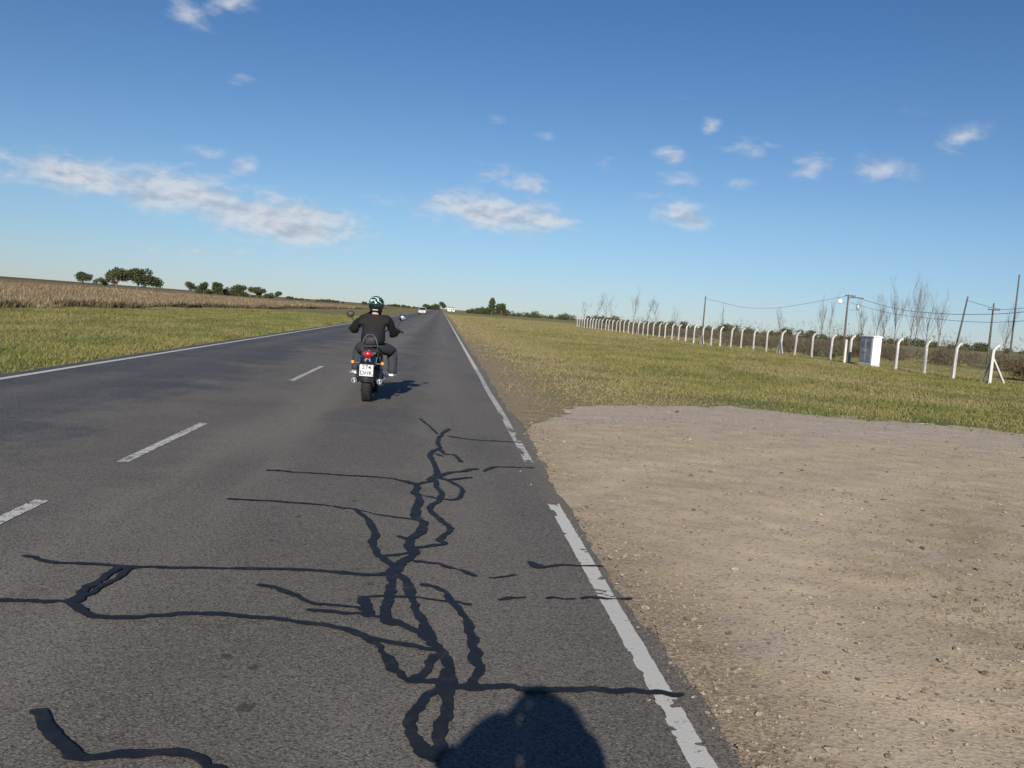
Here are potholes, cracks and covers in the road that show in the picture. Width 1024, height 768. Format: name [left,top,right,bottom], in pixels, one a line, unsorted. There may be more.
crack [0,418,685,763]
